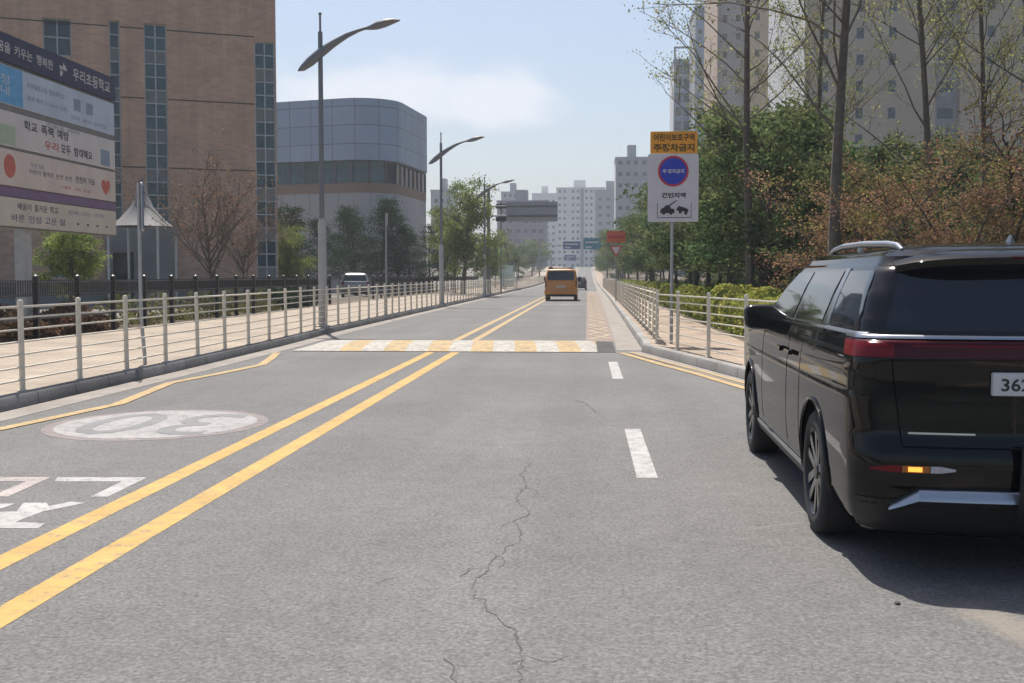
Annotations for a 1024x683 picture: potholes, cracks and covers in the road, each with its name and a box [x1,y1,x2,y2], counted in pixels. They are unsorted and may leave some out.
crack [460,455,567,682]
